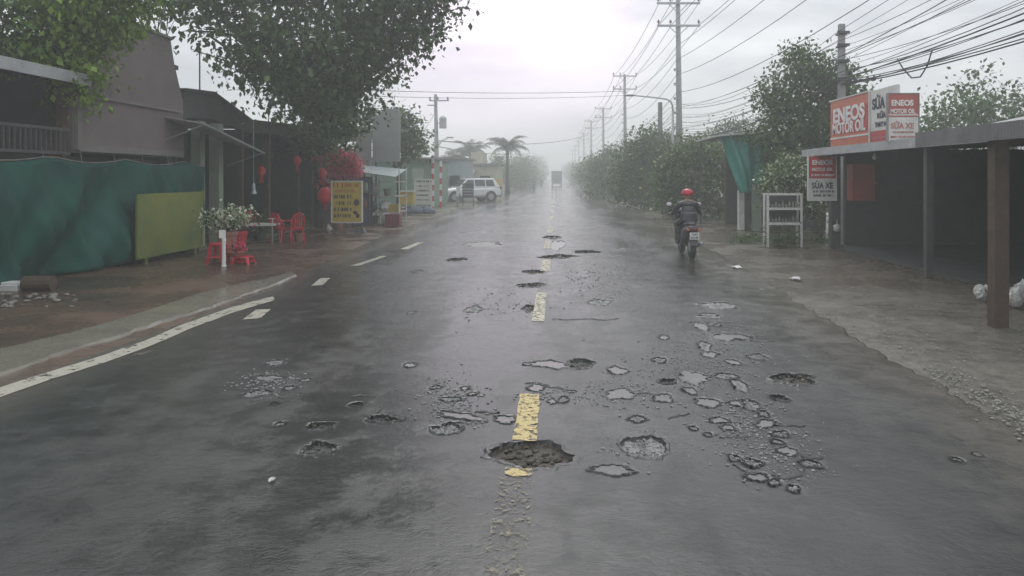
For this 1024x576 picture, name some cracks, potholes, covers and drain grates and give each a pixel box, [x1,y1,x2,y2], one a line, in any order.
pothole [765,372,820,386]
pothole [524,359,572,370]
pothole [797,458,824,469]
pothole [585,463,639,477]
pothole [365,414,405,424]
pothole [480,438,582,472]
pothole [303,422,338,431]
pothole [741,457,765,469]
pothole [239,389,277,398]
pothole [743,472,772,483]
pothole [774,445,799,457]
pothole [298,439,342,458]
